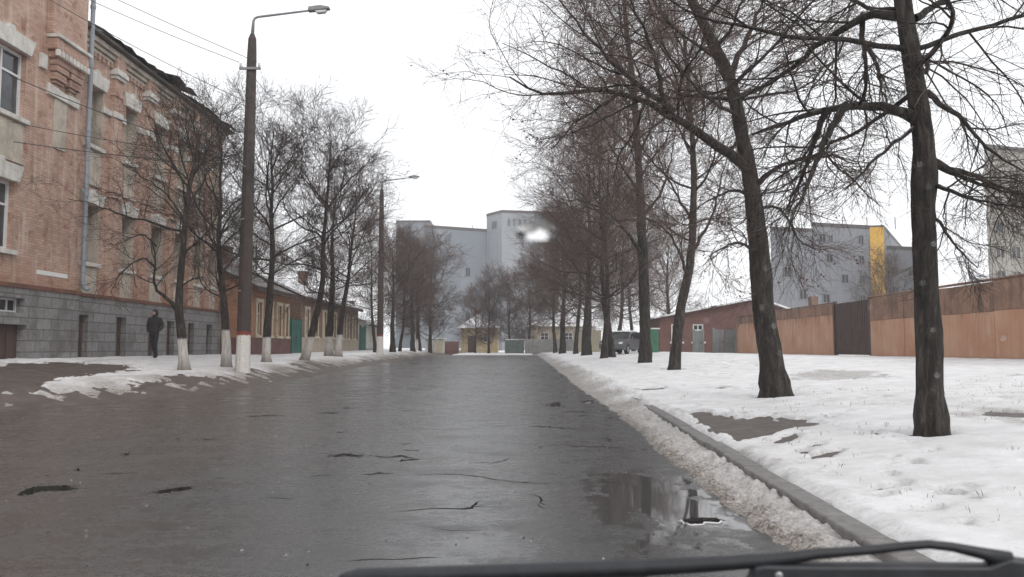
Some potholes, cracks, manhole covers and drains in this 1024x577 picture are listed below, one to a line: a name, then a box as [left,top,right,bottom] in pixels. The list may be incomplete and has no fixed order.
crack [364,443,550,509]
pothole [678,517,726,526]
crack [398,500,487,531]
crack [530,411,627,449]
